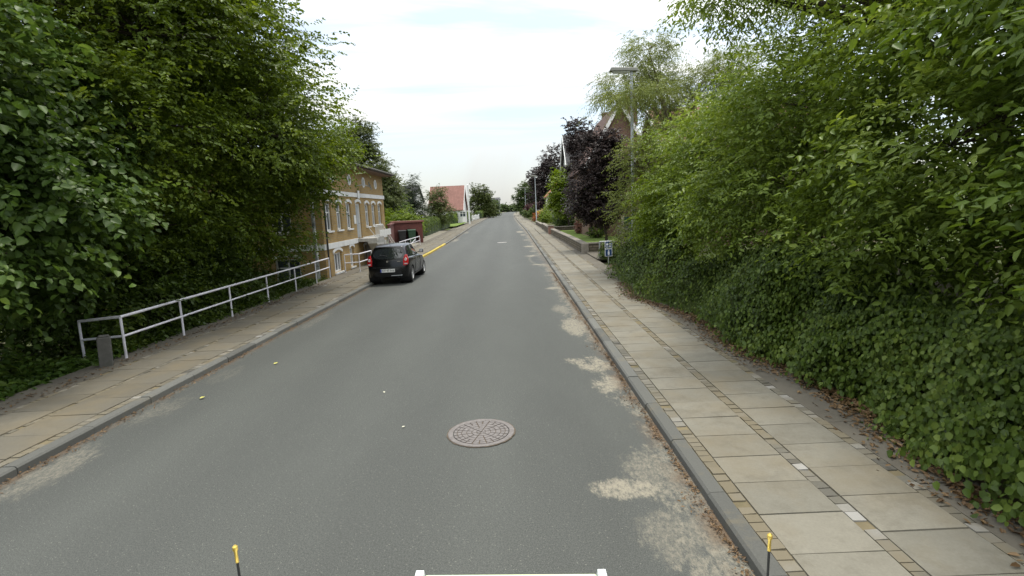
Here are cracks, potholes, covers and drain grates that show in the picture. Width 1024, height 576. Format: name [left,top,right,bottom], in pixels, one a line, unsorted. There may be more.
manhole cover [446,419,516,448]
